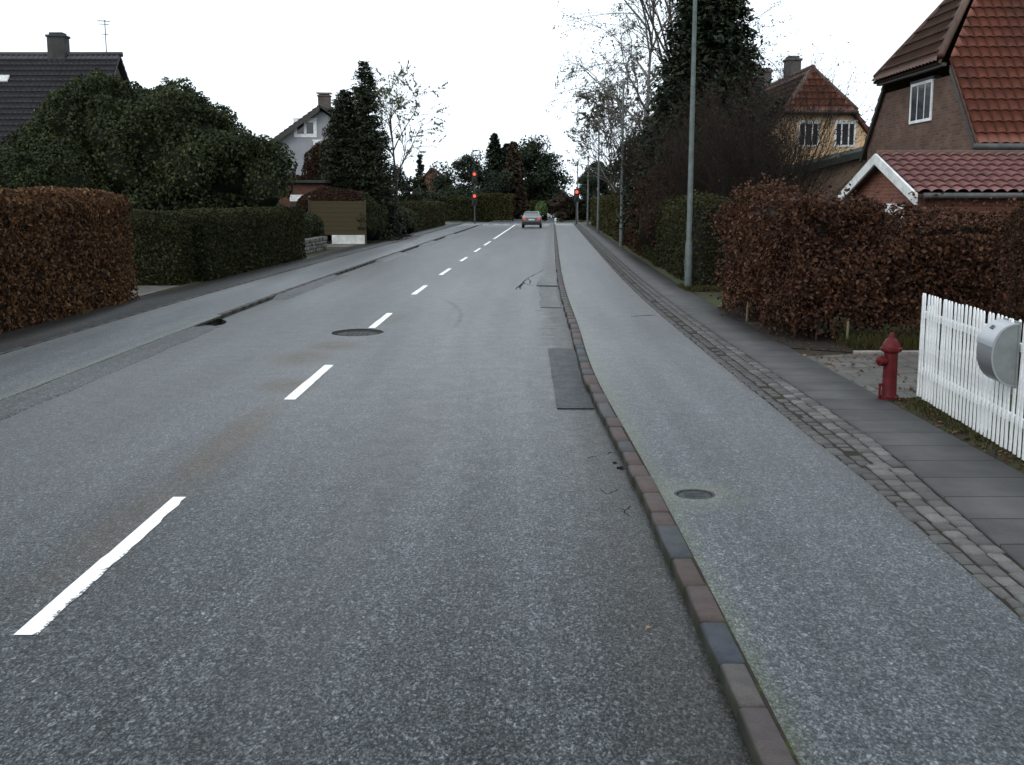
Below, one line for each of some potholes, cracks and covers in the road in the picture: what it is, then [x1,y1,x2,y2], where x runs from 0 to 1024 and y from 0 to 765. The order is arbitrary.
manhole cover [674,489,716,499]
